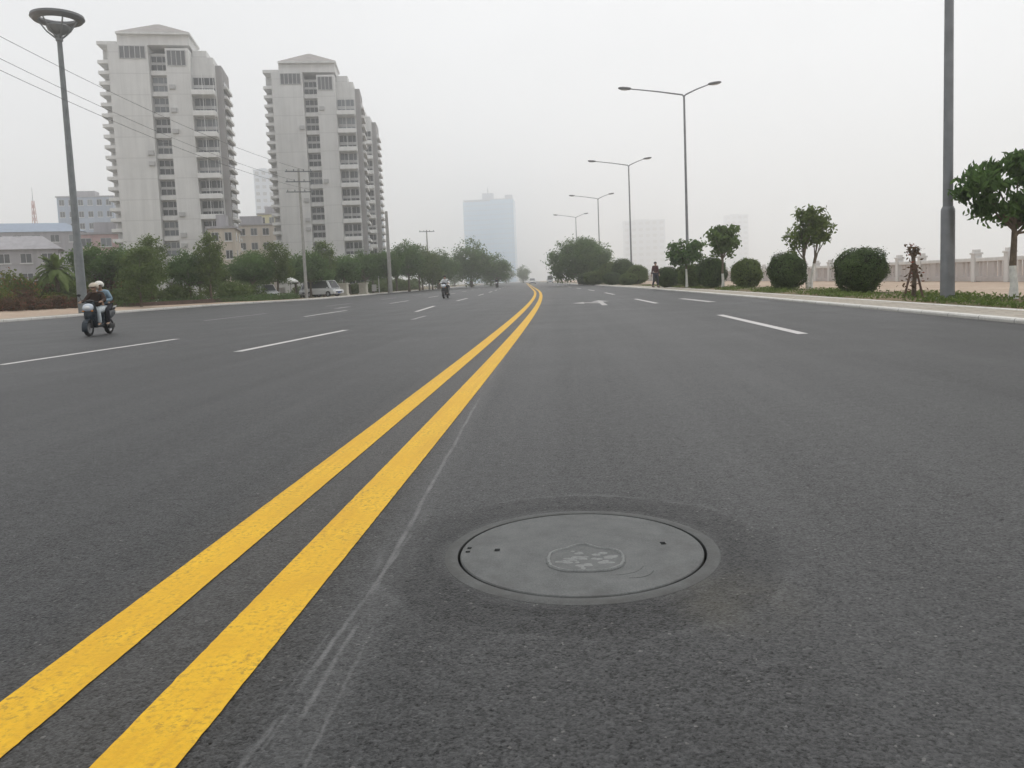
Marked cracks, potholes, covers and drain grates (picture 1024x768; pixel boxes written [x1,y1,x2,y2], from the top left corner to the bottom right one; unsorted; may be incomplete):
manhole cover [445,511,721,606]
